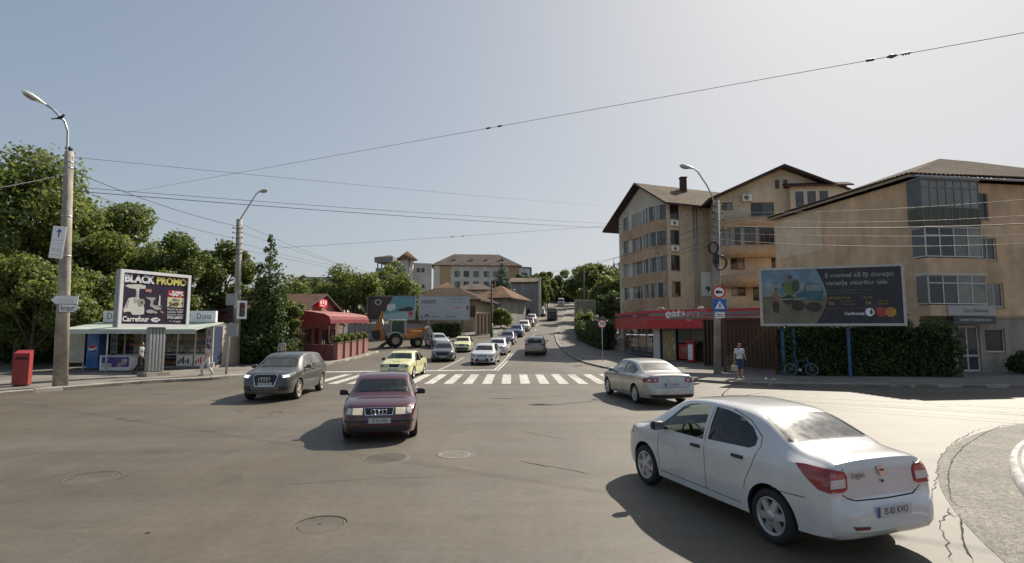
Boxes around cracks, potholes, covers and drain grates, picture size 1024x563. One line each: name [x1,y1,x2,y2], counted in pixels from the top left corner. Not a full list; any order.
manhole cover [294,516,347,533]
manhole cover [61,472,120,484]
manhole cover [361,453,409,464]
crack [931,423,1017,560]
